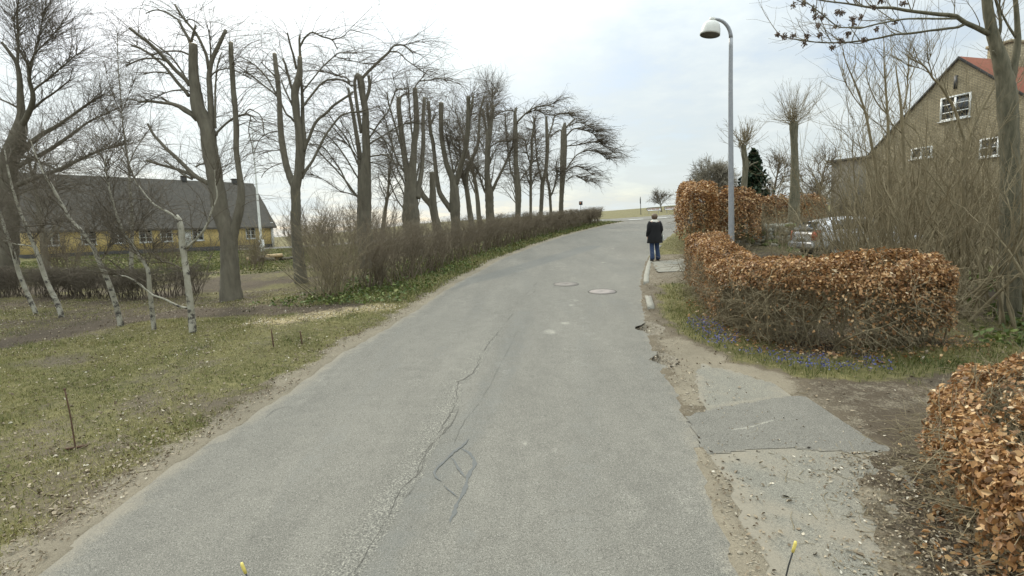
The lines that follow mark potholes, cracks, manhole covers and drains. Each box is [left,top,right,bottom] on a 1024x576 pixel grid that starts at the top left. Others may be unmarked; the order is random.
pothole [650,352,681,367]
crack [351,292,534,571]
pothole [635,321,665,335]
